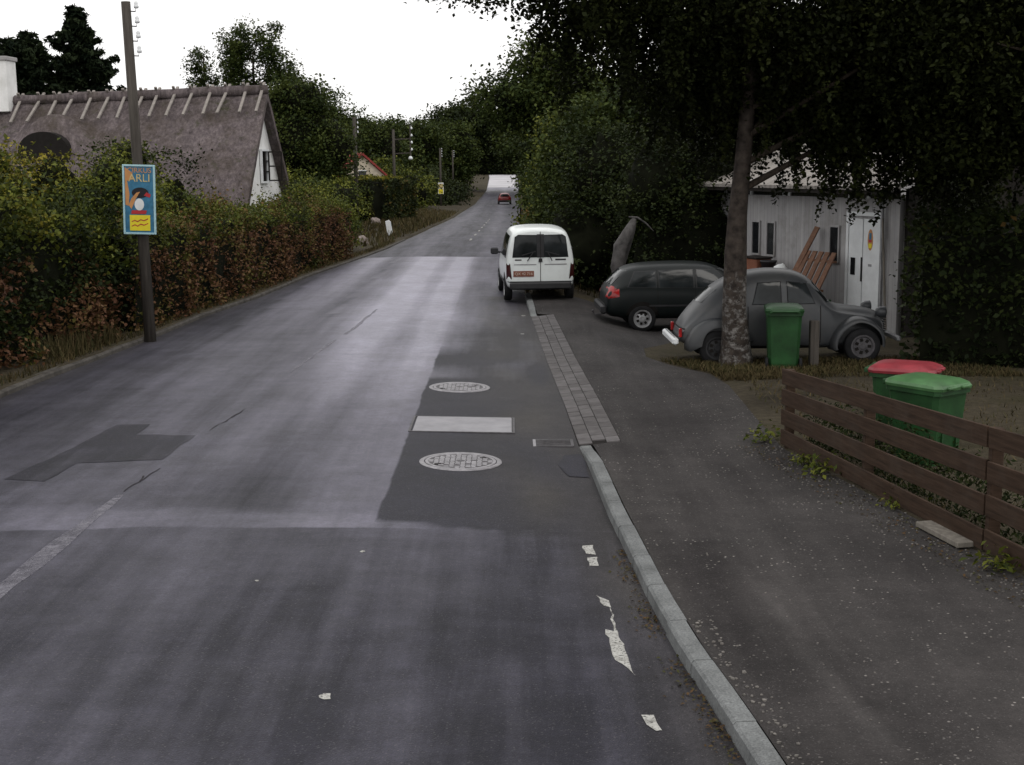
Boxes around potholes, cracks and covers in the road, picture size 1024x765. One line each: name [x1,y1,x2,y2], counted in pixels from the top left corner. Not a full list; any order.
manhole cover [408,416,515,434]
manhole cover [419,452,502,471]
manhole cover [429,382,490,393]
drain grate [533,439,574,447]
